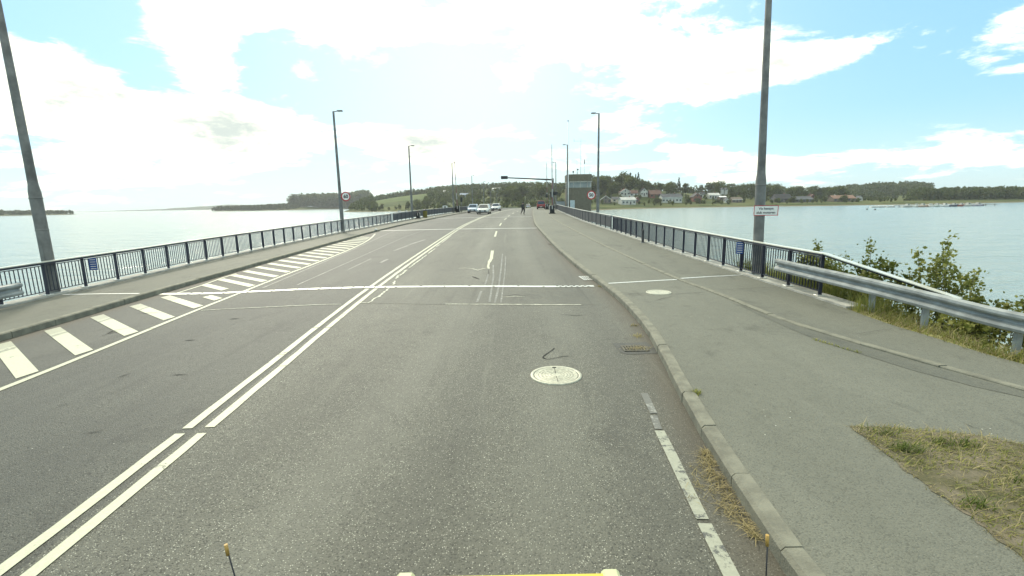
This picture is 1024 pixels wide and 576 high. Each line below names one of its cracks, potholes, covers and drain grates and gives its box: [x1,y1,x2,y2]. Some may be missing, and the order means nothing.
manhole cover [530,366,582,385]
